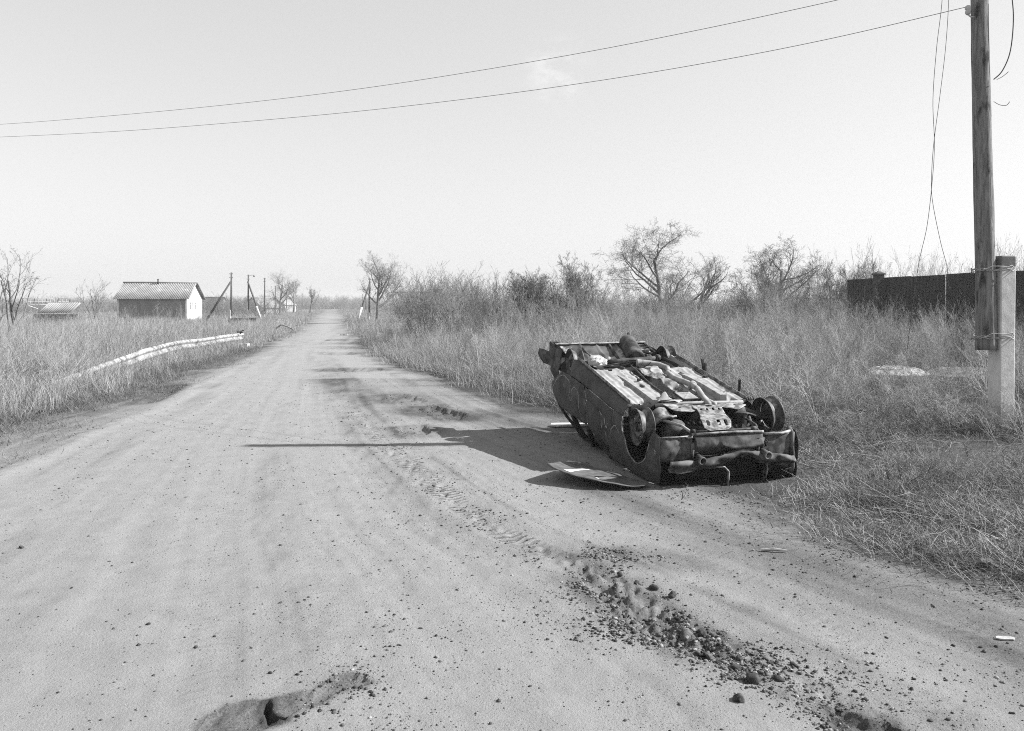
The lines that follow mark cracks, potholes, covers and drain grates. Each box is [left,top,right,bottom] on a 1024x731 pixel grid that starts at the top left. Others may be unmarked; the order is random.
pothole [829,709,902,731]
pothole [198,672,370,731]
pothole [562,555,740,665]
pothole [411,406,467,420]
